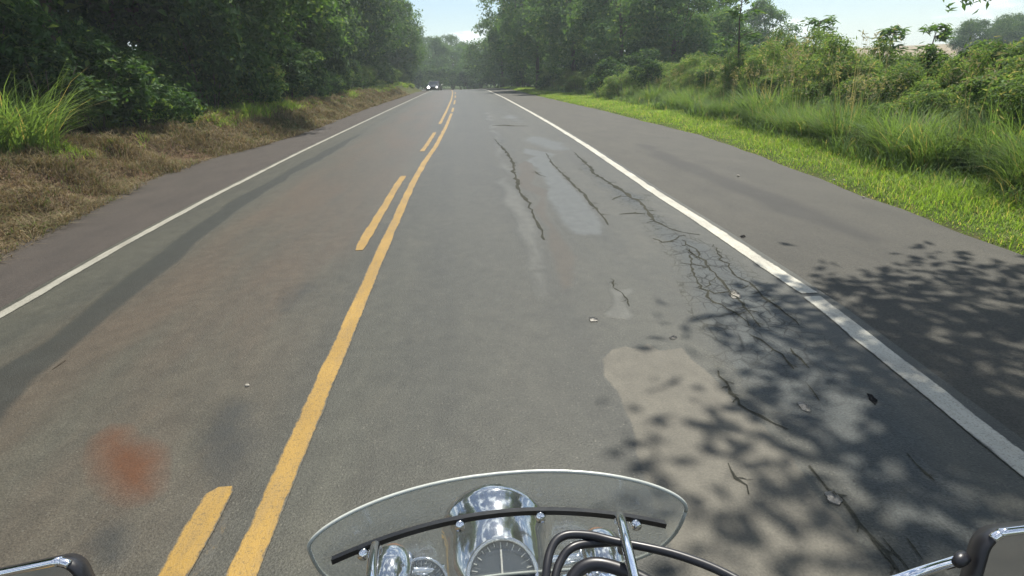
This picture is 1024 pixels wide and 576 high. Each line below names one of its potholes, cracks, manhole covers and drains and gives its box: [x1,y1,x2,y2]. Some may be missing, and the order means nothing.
crack [493,125,1024,576]
